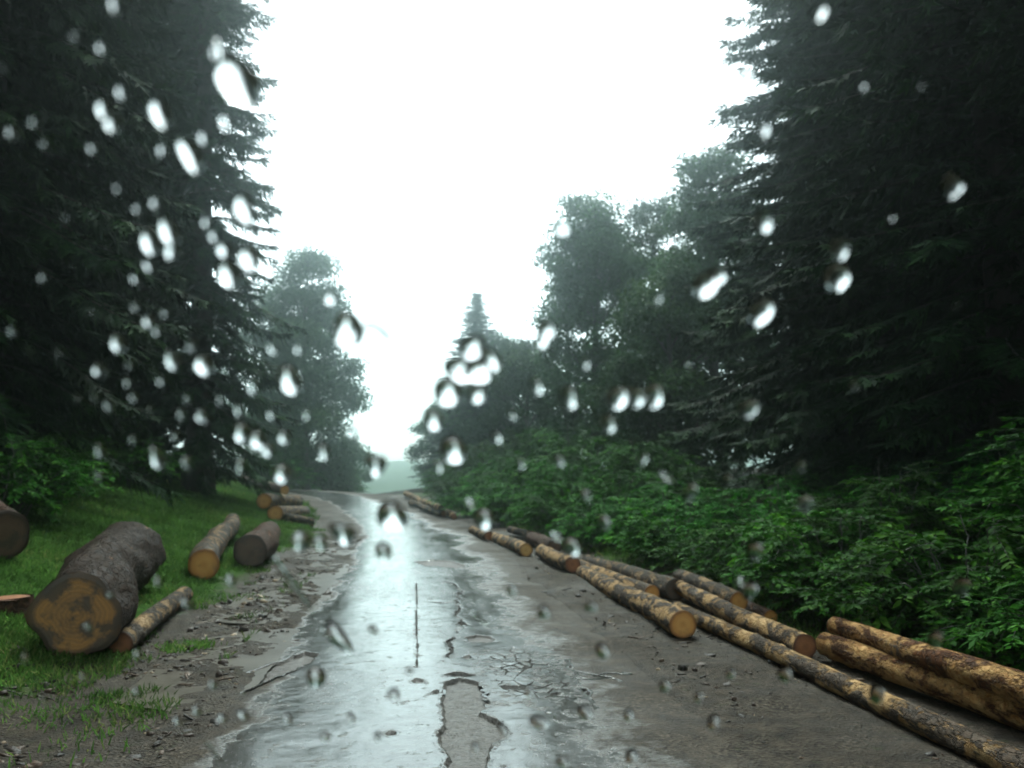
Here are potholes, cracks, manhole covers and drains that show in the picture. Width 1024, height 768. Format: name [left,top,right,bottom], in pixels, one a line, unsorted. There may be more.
crack [432,575,633,711]
pothole [432,676,514,768]
